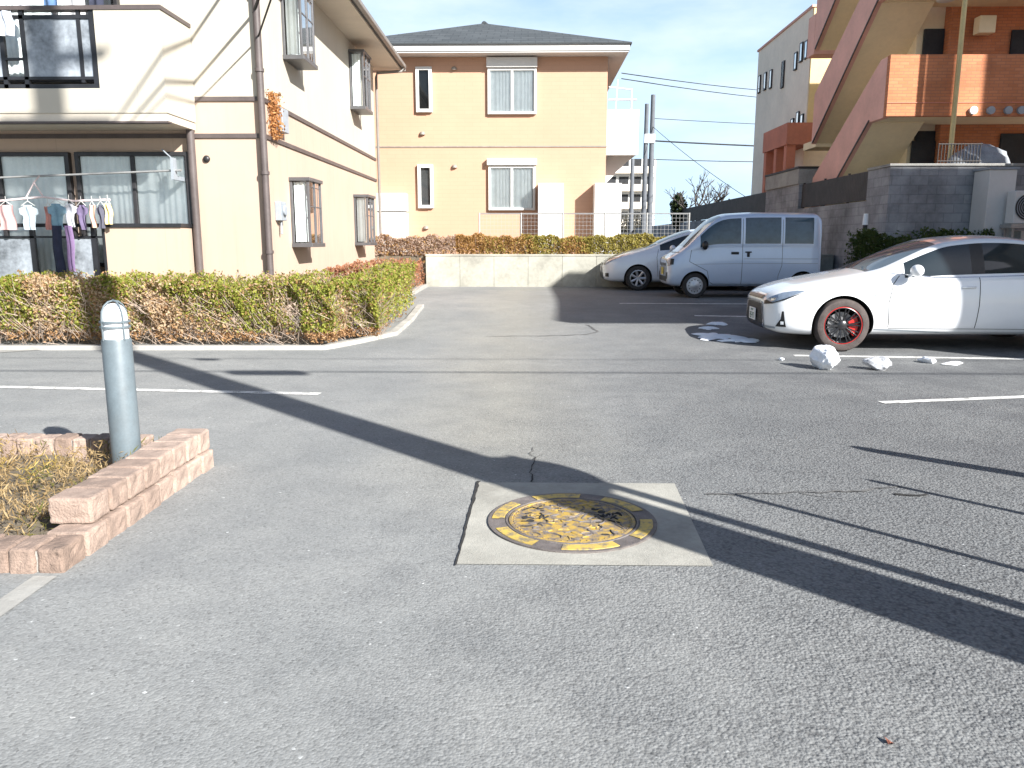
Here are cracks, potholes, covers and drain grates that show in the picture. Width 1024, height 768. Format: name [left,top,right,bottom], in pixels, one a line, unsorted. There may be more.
crack [705,485,928,498]
manhole cover [488,493,657,554]
